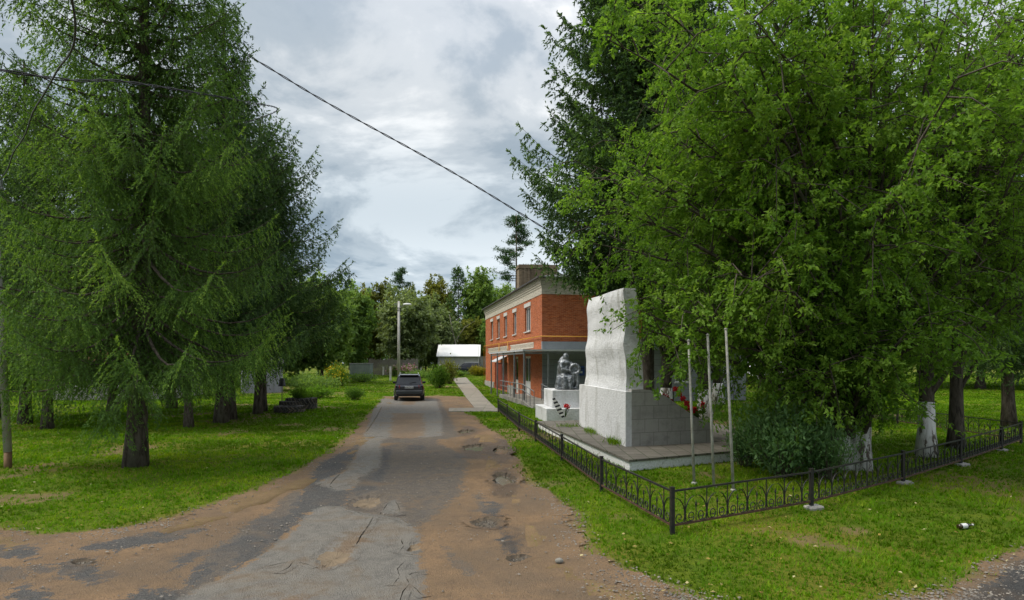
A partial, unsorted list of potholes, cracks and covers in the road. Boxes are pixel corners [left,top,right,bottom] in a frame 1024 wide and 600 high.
pothole [500,552,537,564]
pothole [482,445,516,455]
pothole [487,470,523,488]
crack [308,473,431,600]
crack [260,560,319,574]
pothole [456,443,497,453]
pothole [62,556,103,566]
pothole [463,514,507,530]
